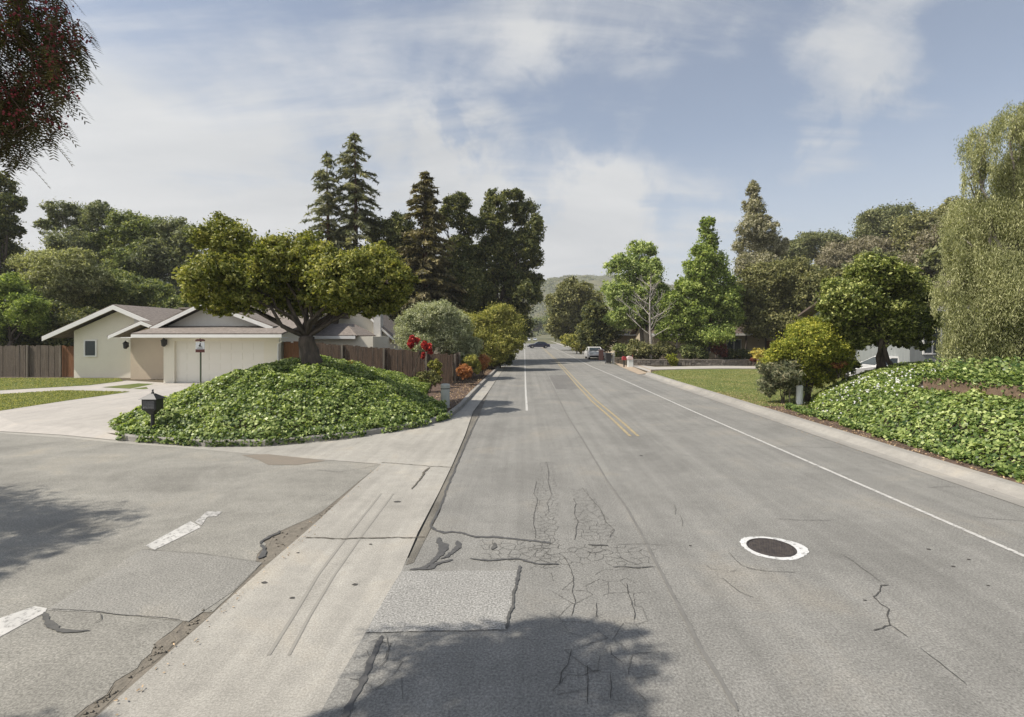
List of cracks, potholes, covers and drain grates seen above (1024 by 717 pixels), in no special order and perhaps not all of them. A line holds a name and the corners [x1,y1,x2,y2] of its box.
crack [481,462,662,703]
crack [845,556,964,682]
manhole cover [739,536,809,560]
crack [351,638,406,699]
